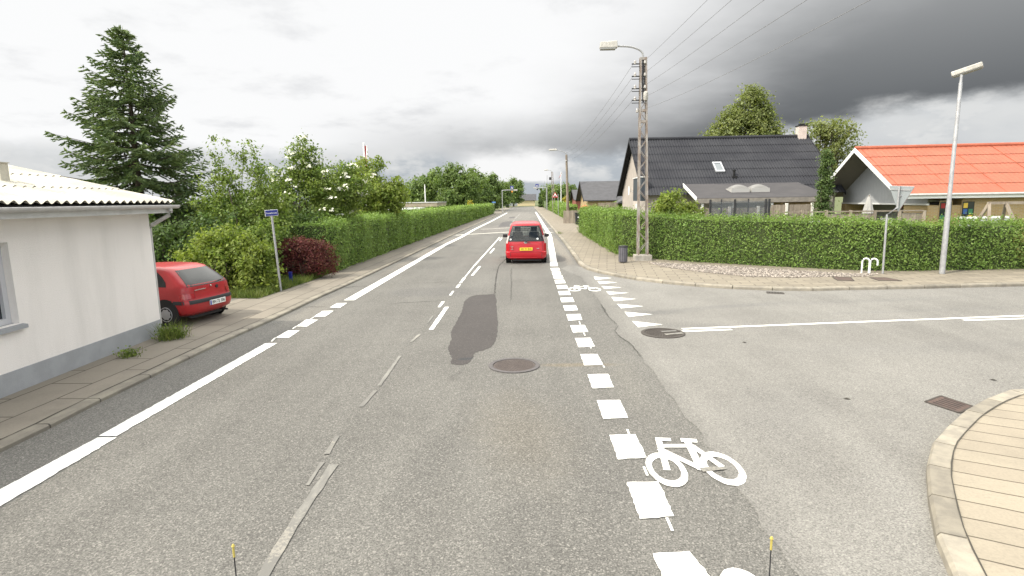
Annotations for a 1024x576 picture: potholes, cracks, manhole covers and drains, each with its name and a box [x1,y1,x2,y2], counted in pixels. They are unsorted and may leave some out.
drain grate [924,395,973,414]
manhole cover [641,328,685,338]
manhole cover [488,358,540,373]
